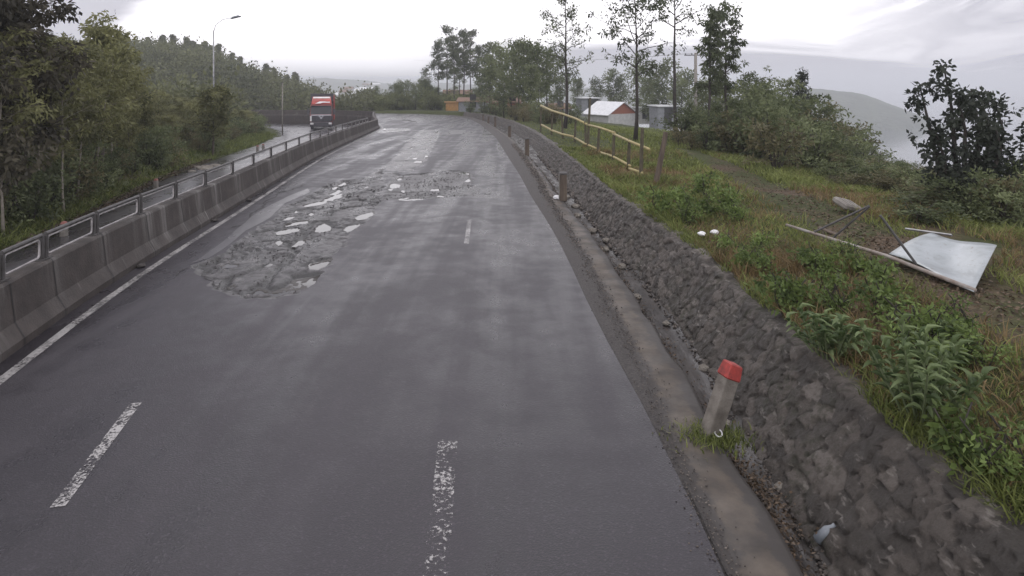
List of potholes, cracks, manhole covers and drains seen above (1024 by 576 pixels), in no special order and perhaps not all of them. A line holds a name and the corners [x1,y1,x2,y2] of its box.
pothole [251,274,321,297]
pothole [307,257,333,270]
pothole [314,223,332,233]
